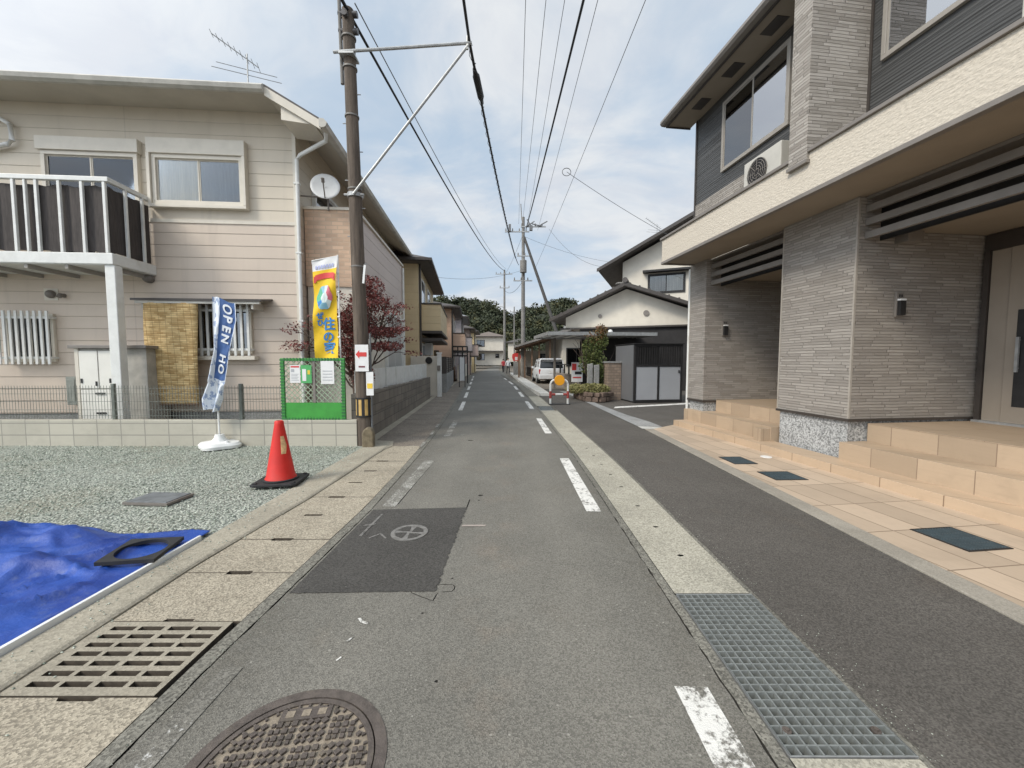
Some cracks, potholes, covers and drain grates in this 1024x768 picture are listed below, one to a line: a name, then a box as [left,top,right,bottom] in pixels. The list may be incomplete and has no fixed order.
drain grate [676,594,919,768]
manhole cover [184,689,387,768]
